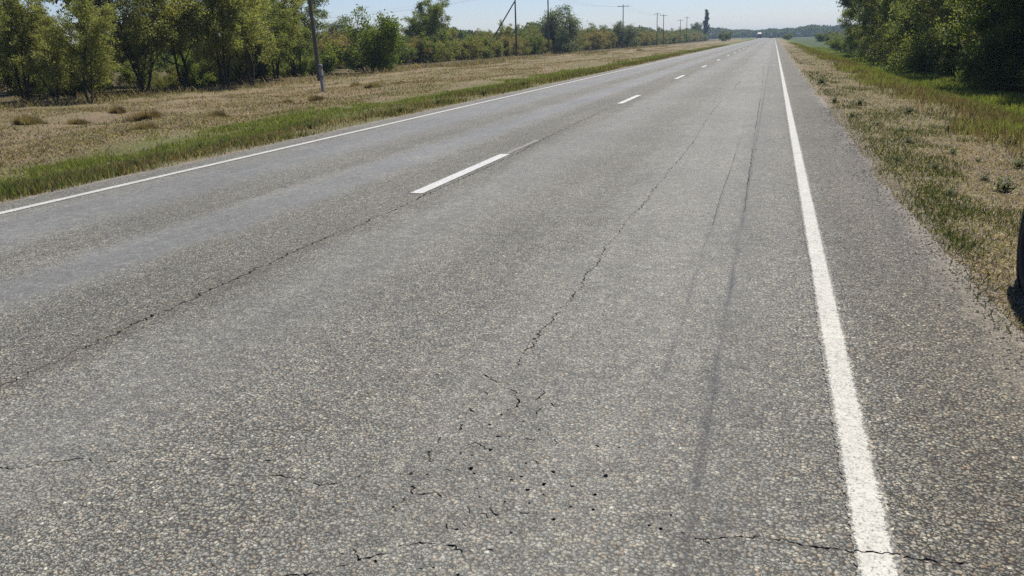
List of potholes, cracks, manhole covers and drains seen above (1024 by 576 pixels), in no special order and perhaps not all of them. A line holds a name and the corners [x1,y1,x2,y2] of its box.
crack [0,458,360,486]
crack [284,103,719,576]
crack [648,514,969,565]
crack [712,66,764,226]
